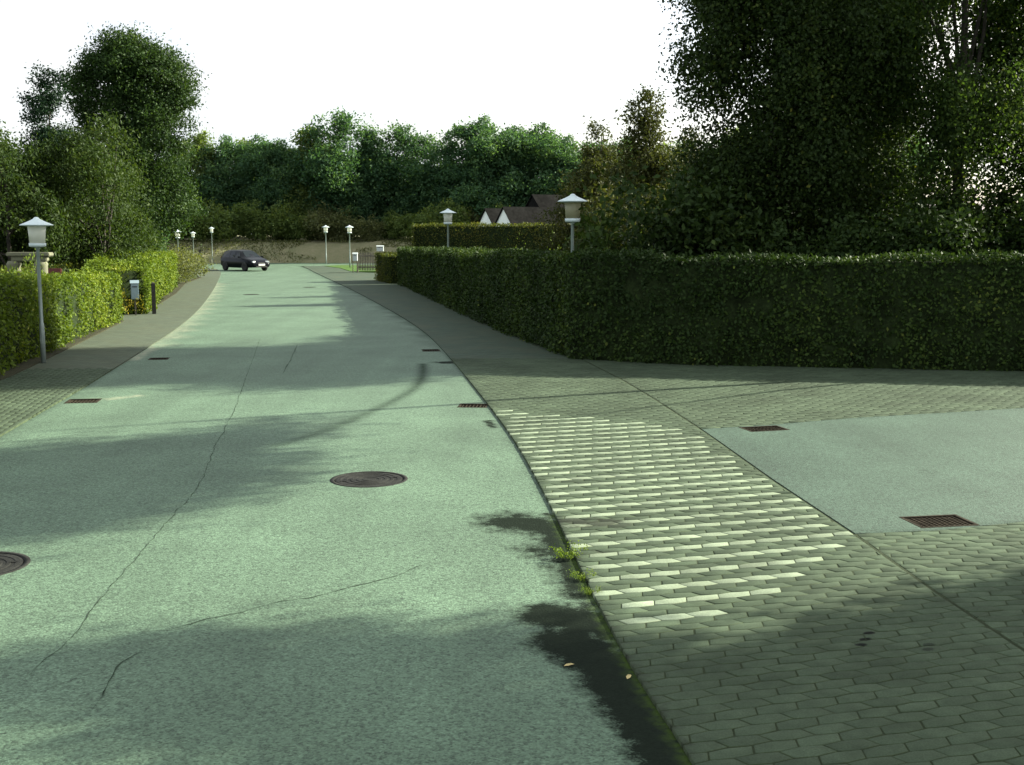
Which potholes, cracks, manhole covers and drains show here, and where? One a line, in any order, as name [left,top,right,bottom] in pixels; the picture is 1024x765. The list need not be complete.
crack [29,342,259,675]
crack [91,565,421,711]
drain grate [899,514,979,528]
manhole cover [0,551,31,575]
manhole cover [330,471,408,488]
